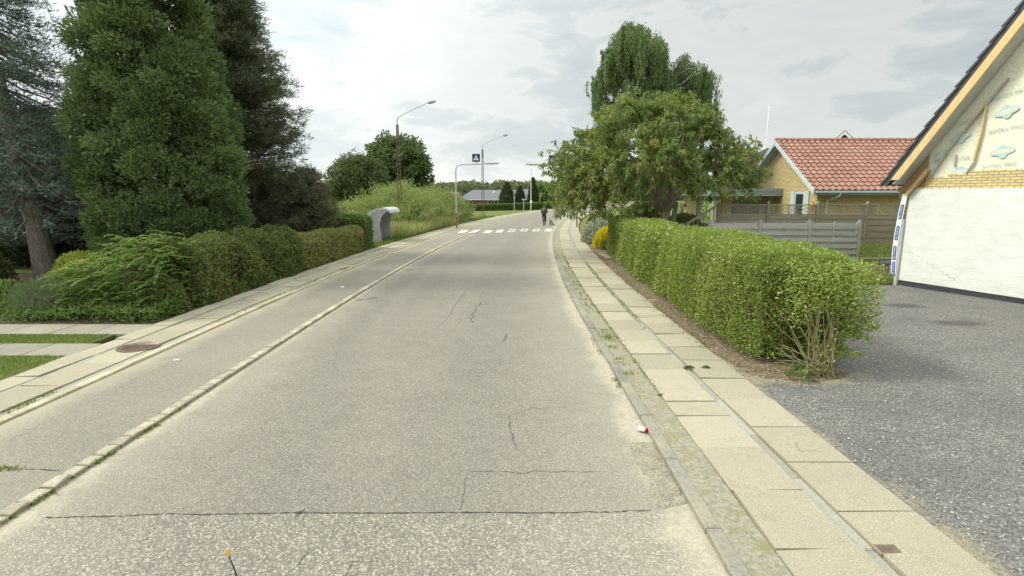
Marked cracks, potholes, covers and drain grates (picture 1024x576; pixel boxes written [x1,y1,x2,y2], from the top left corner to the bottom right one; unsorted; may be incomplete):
manhole cover [115,341,161,353]
crack [459,470,590,509]
utility cover [871,544,902,556]
